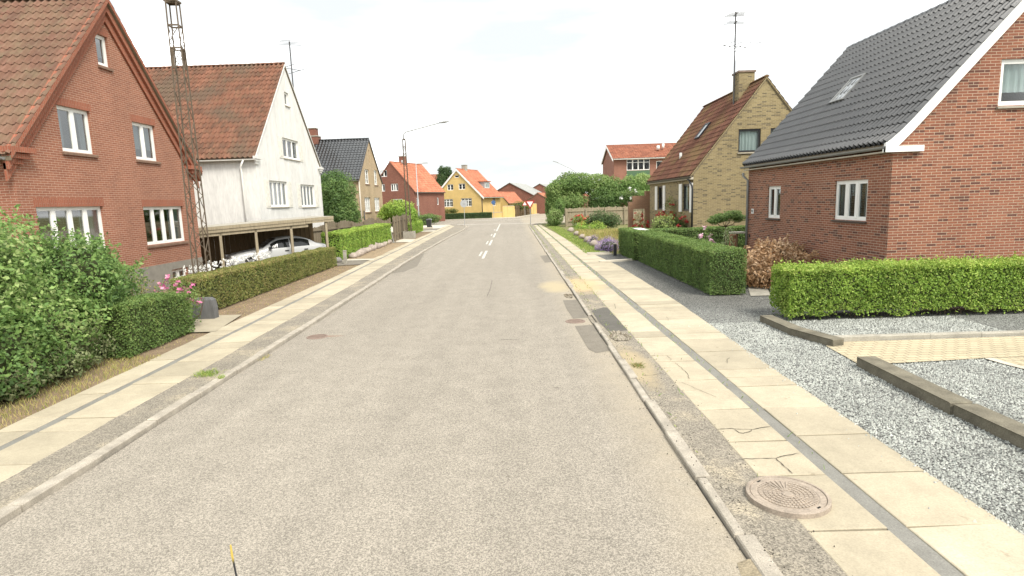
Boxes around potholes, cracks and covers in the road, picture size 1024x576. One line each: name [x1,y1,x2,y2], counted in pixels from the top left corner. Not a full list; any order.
manhole cover [745,476,832,519]
